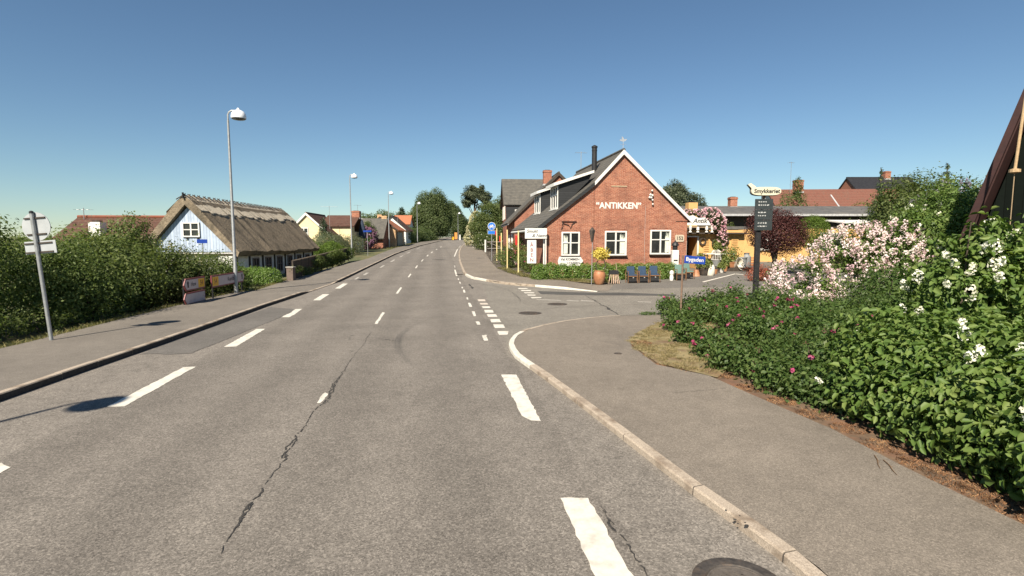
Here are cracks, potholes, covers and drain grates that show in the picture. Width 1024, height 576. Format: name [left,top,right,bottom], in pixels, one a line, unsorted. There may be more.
crack [220,335,369,554]
manhole cover [692,558,776,576]
crack [601,506,647,576]
